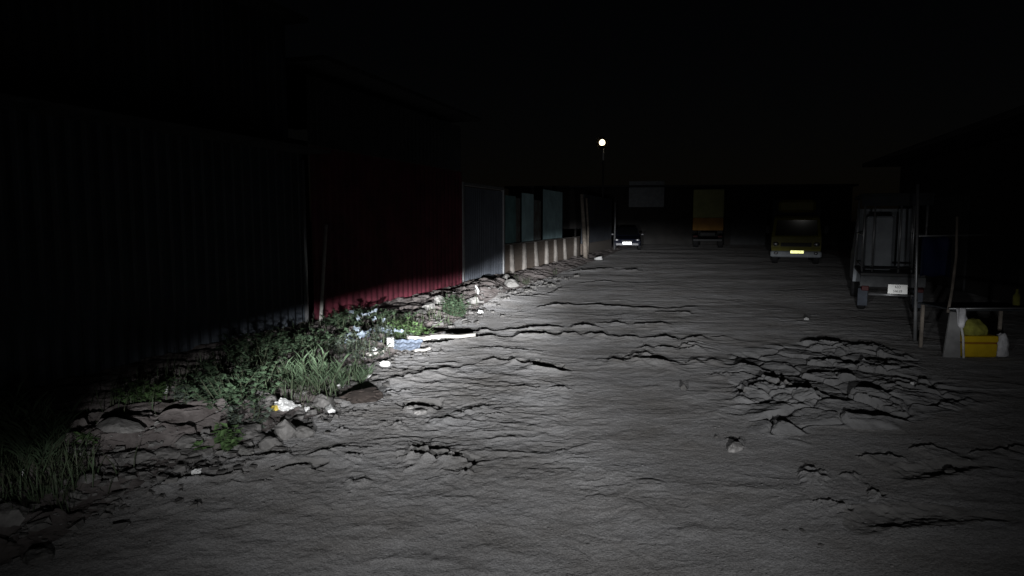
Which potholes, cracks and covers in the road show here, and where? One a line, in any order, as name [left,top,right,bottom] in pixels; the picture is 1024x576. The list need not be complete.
crack [378,326,1021,475]
crack [155,365,466,486]
